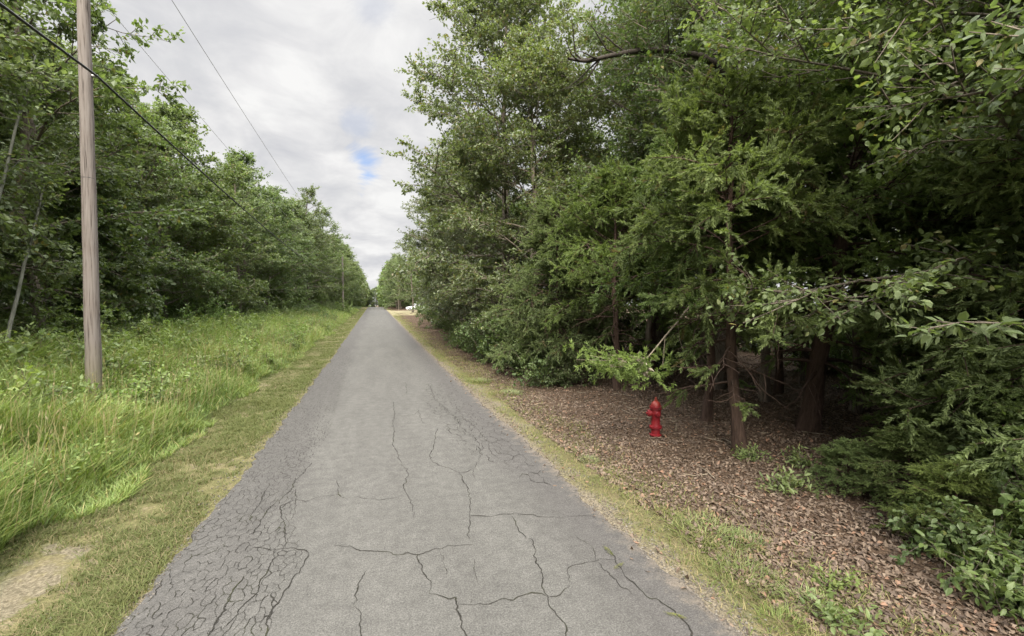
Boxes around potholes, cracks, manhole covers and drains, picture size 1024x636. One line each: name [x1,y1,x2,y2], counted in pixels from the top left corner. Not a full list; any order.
crack [119,348,693,636]
